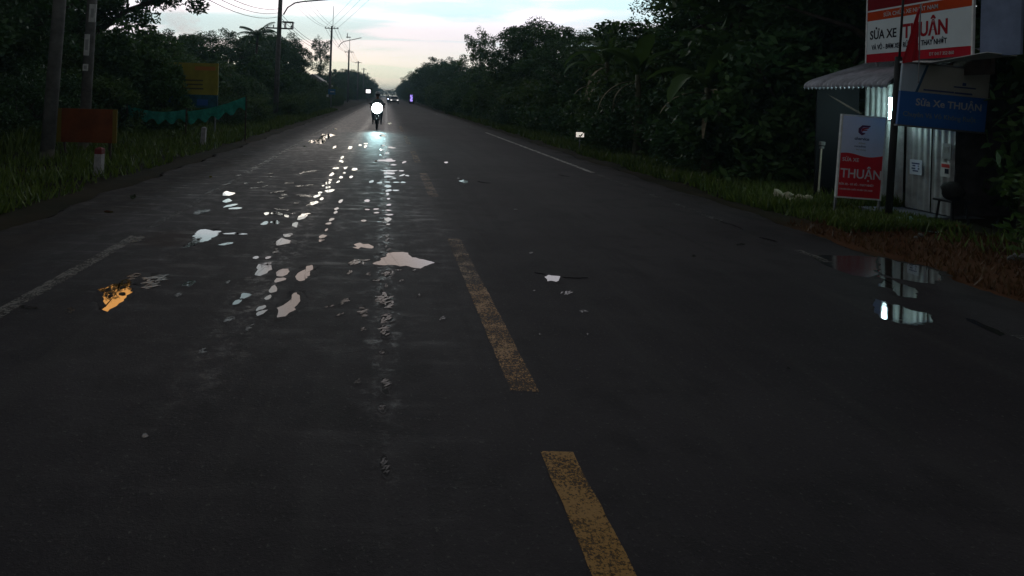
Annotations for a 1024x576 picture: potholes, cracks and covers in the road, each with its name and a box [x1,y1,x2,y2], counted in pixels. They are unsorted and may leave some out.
pothole [371,287,397,313]
pothole [379,375,394,397]
